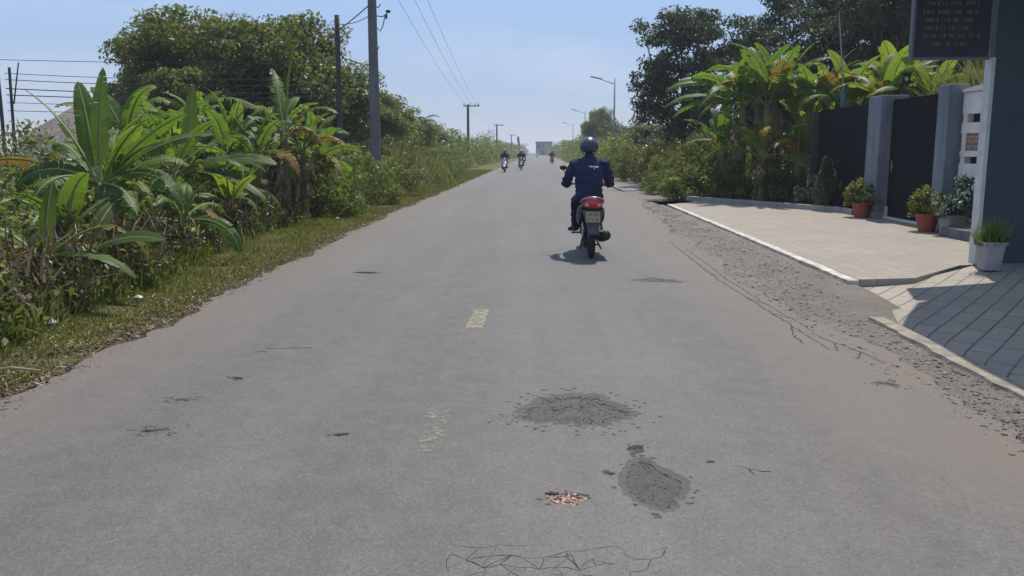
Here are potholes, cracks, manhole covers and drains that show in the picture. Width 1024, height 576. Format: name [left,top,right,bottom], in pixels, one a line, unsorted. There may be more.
crack [670,242,881,362]
pothole [535,490,592,506]
crack [446,545,666,576]
